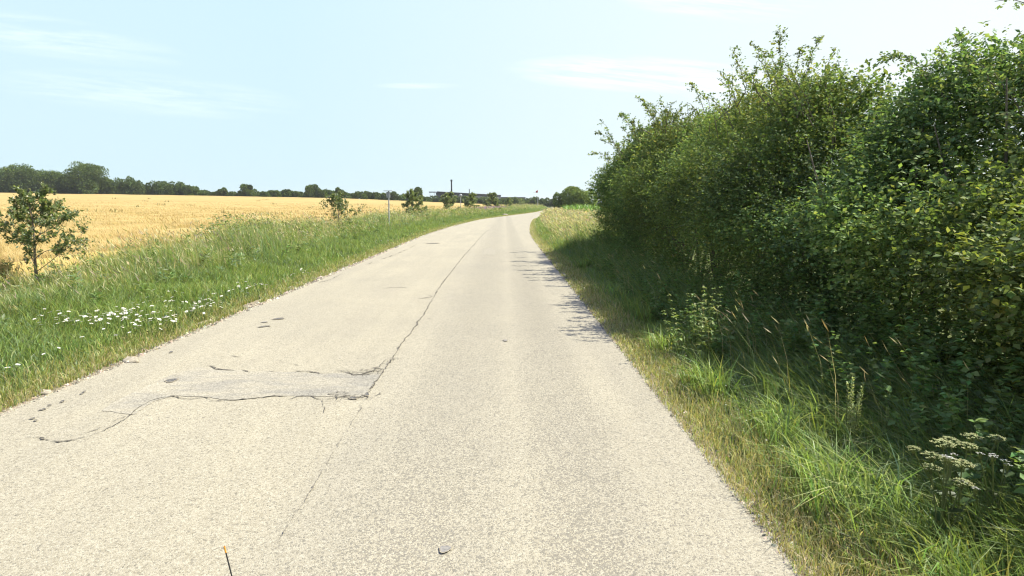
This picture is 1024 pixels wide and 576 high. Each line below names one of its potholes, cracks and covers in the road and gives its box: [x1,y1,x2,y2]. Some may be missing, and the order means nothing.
crack [40,367,384,442]
